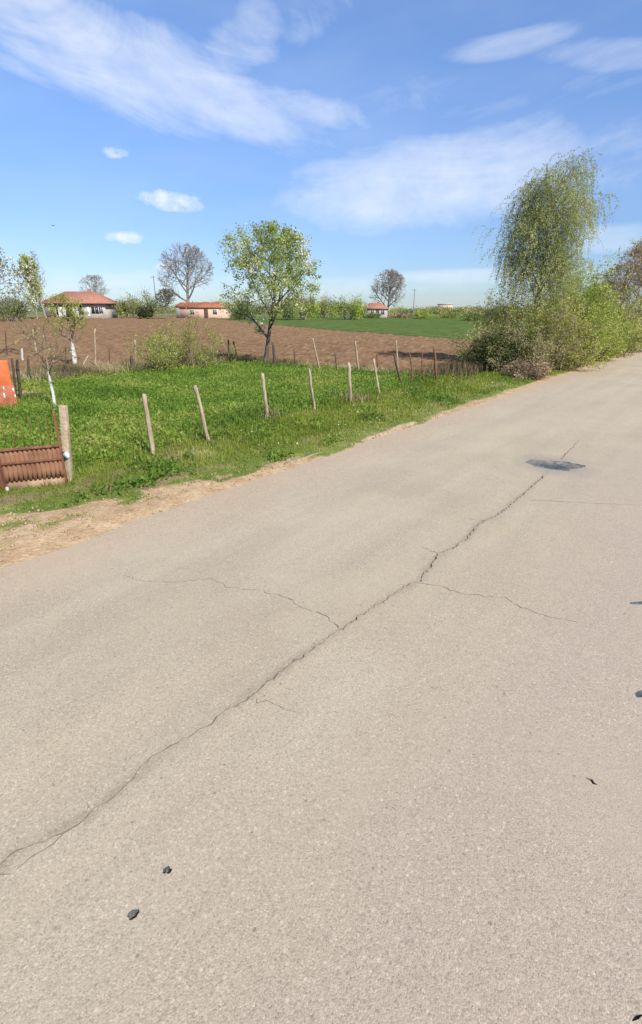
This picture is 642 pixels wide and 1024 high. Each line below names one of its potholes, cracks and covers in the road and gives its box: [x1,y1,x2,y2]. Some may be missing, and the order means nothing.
crack [0,476,621,875]
pothole [525,459,585,471]
